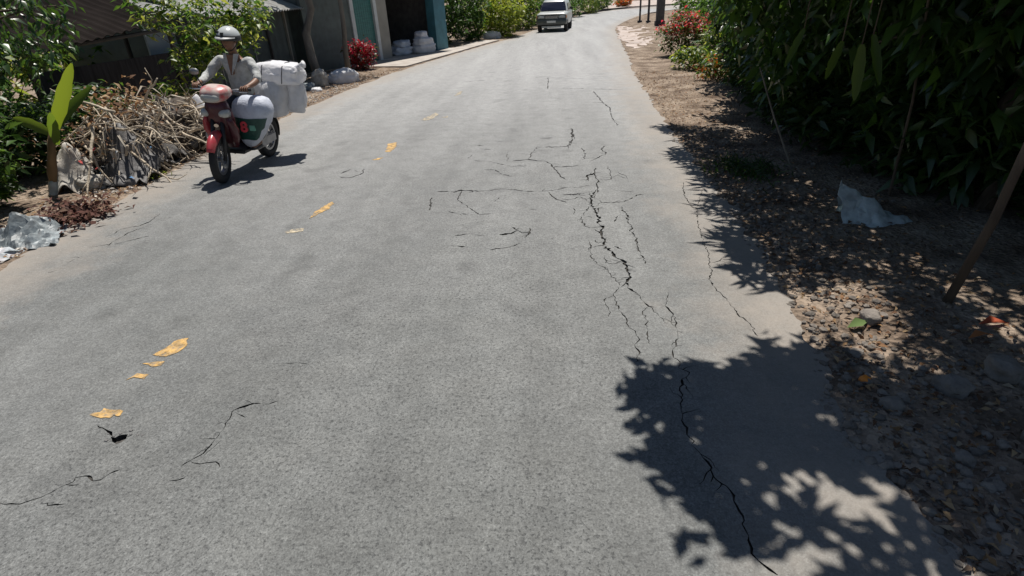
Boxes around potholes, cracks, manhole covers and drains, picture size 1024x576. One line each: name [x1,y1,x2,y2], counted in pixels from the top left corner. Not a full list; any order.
crack [172,401,274,481]
crack [429,129,578,250]
crack [0,470,118,506]
crack [561,147,777,575]
